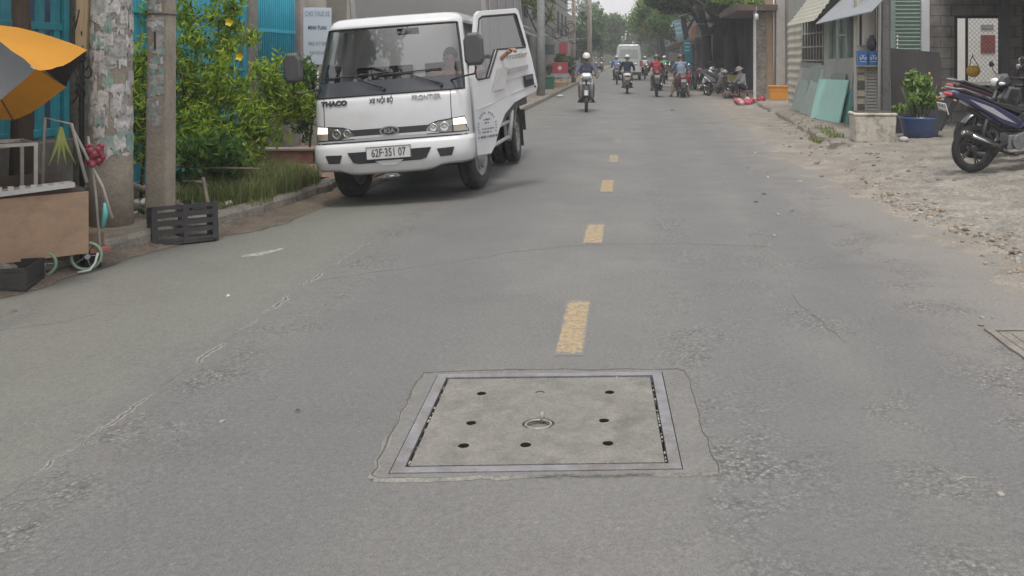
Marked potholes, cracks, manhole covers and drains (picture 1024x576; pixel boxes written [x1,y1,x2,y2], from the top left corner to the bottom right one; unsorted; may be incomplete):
crack [0,312,107,330]
manhole cover [370,369,717,481]
crack [794,298,846,343]
